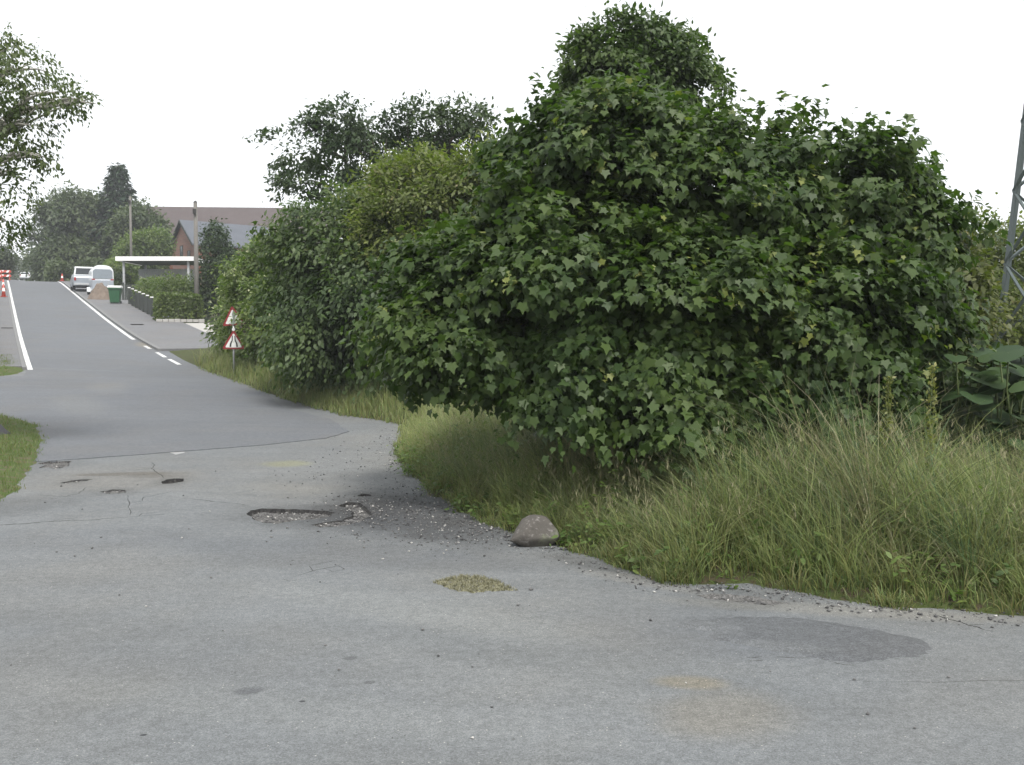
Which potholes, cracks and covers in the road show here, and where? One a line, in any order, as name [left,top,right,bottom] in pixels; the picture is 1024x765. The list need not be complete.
pothole [38,461,71,469]
pothole [313,502,373,528]
crack [6,462,168,525]
pothole [247,508,335,524]
